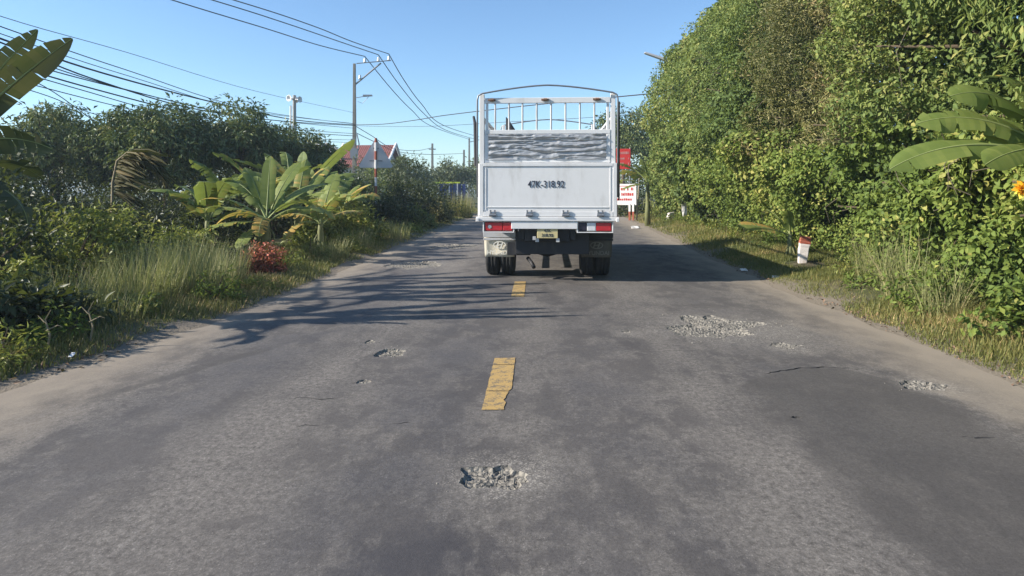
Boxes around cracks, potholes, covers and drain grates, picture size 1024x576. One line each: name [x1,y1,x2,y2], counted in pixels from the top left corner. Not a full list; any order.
pothole [373,345,405,358]
crack [767,366,903,385]
pothole [884,377,956,391]
pothole [436,465,545,492]
pothole [662,310,783,343]
pothole [762,340,803,350]
